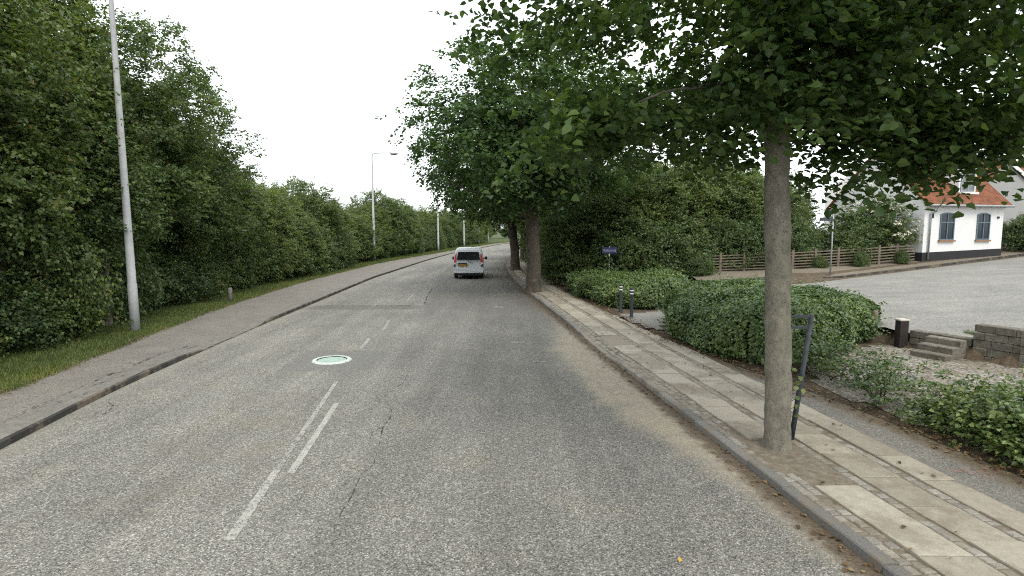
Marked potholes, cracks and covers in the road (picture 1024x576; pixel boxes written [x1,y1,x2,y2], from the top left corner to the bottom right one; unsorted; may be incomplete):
crack [330,373,408,535]
manhole cover [312,355,352,365]
